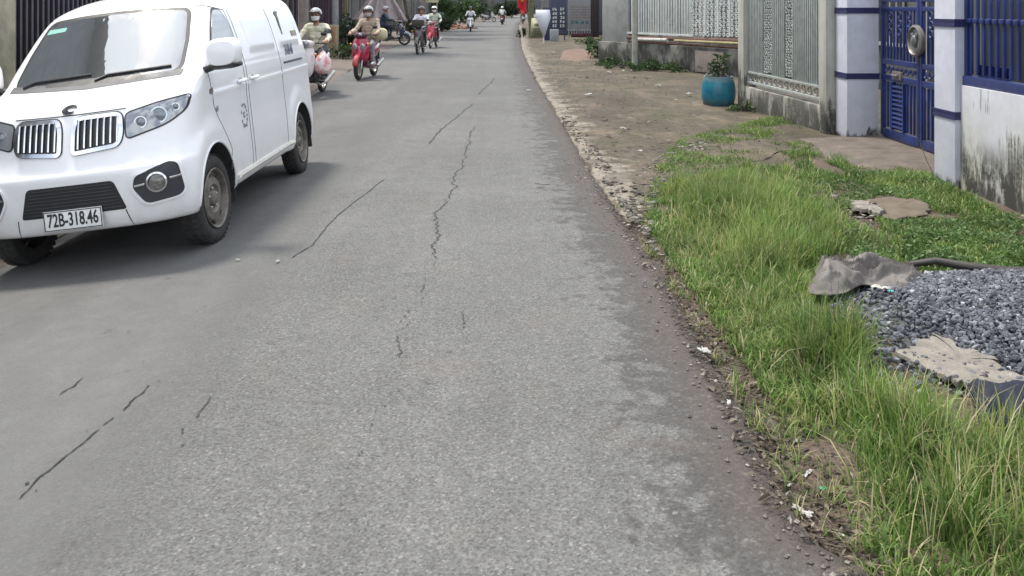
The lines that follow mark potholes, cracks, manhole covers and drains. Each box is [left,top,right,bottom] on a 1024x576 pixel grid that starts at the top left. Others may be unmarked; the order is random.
crack [429,78,494,265]
crack [293,177,386,257]
crack [20,380,159,498]
